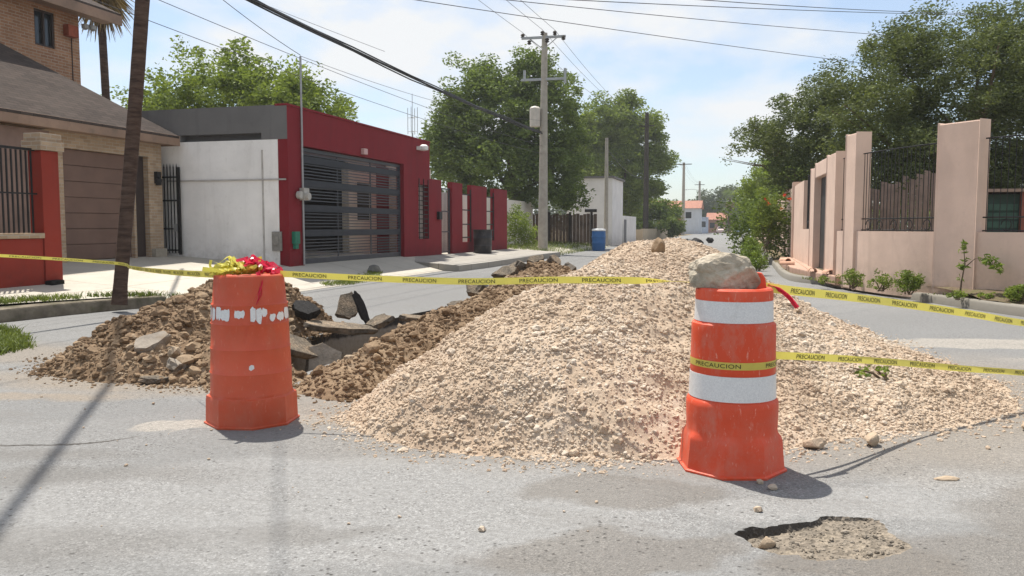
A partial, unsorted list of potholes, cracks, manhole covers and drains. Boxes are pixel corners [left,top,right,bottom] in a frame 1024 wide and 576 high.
pothole [734,516,912,561]
